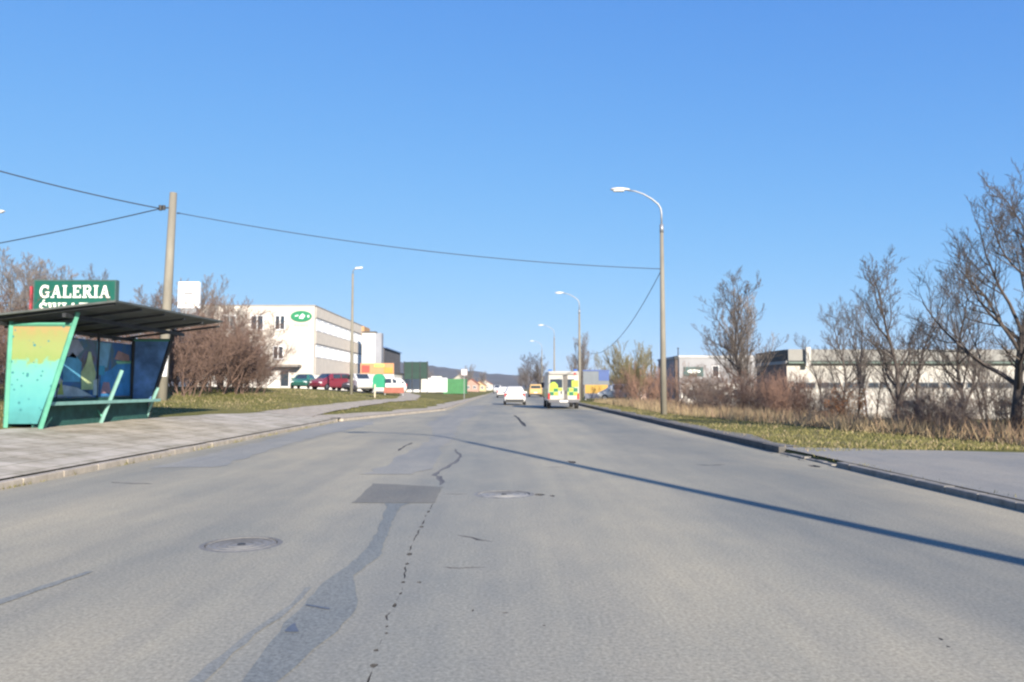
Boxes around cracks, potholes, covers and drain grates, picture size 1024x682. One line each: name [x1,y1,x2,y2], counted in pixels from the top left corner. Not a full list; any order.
crack [367,504,433,682]
manhole cover [199,536,283,552]
manhole cover [474,490,534,498]
